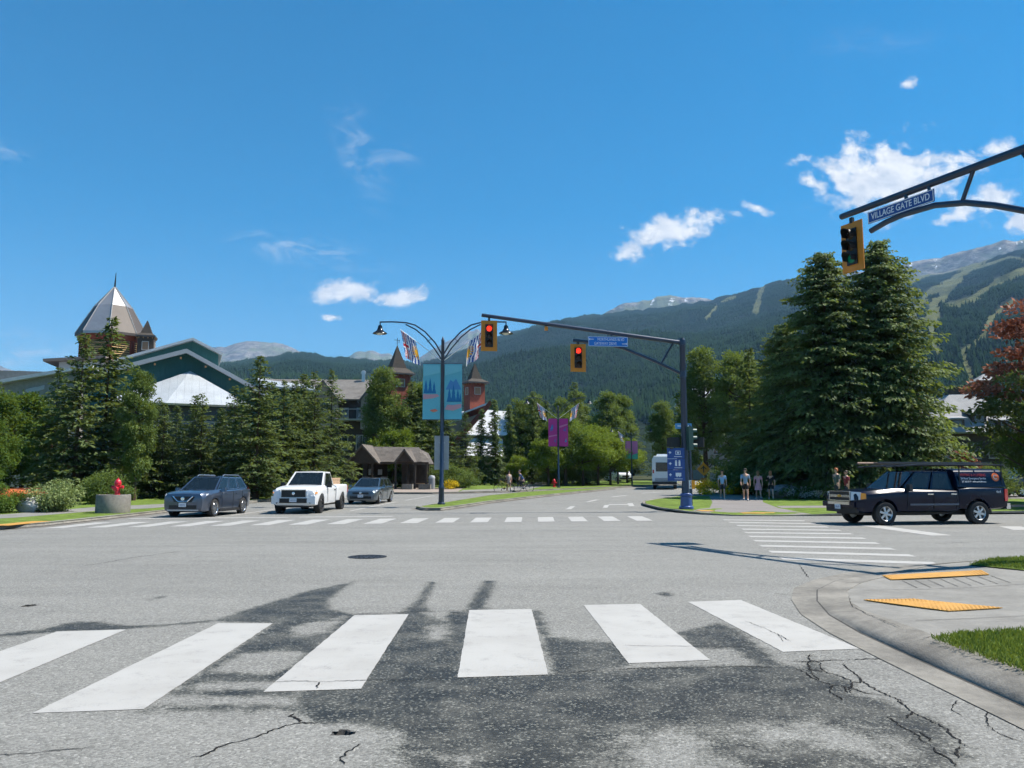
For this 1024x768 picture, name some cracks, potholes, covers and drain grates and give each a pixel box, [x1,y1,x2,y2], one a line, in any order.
crack [796,654,965,767]
pothole [323,727,367,739]
crack [190,713,318,758]
